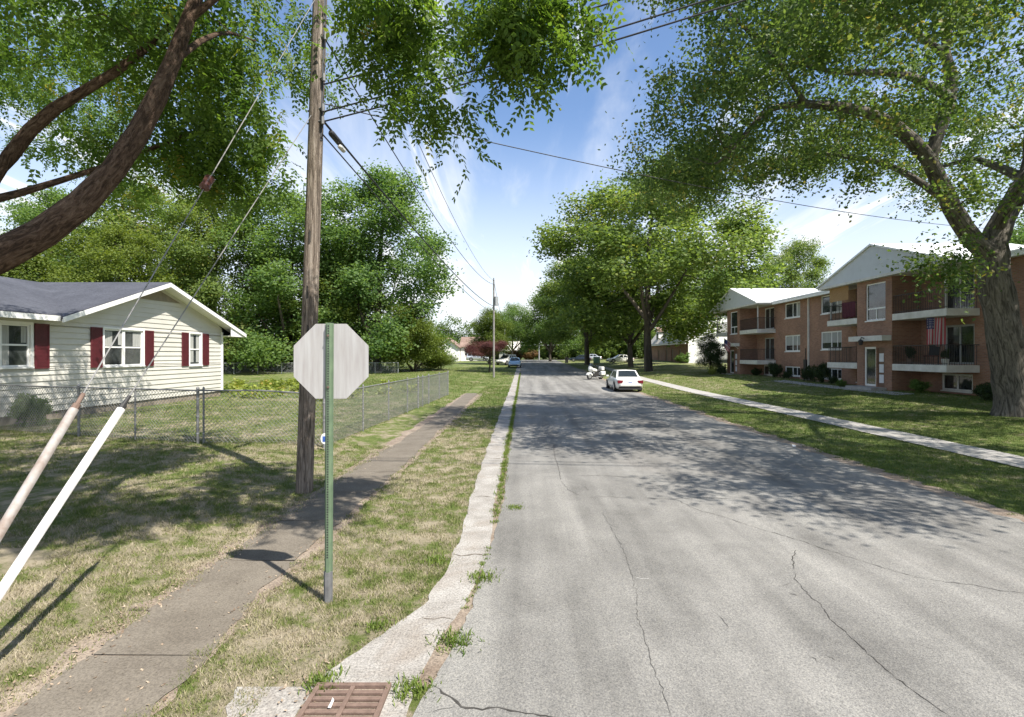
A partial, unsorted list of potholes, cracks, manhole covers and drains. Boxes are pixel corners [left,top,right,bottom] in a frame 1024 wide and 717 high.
crack [422,686,552,717]
crack [604,515,671,714]
drain grate [296,682,392,717]
crack [653,498,1020,716]
